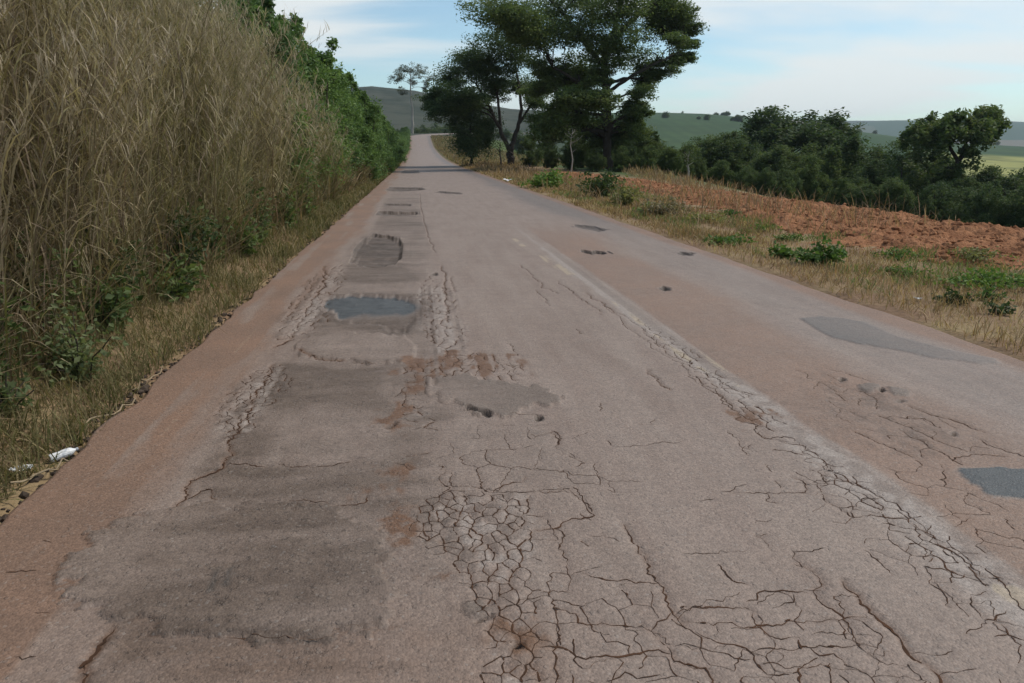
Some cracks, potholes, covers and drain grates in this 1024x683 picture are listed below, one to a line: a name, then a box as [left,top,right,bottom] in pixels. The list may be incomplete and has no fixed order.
crack [397,322,1024,683]
crack [277,266,385,366]
pothole [349,233,406,269]
pothole [568,224,611,232]
crack [167,365,292,509]
